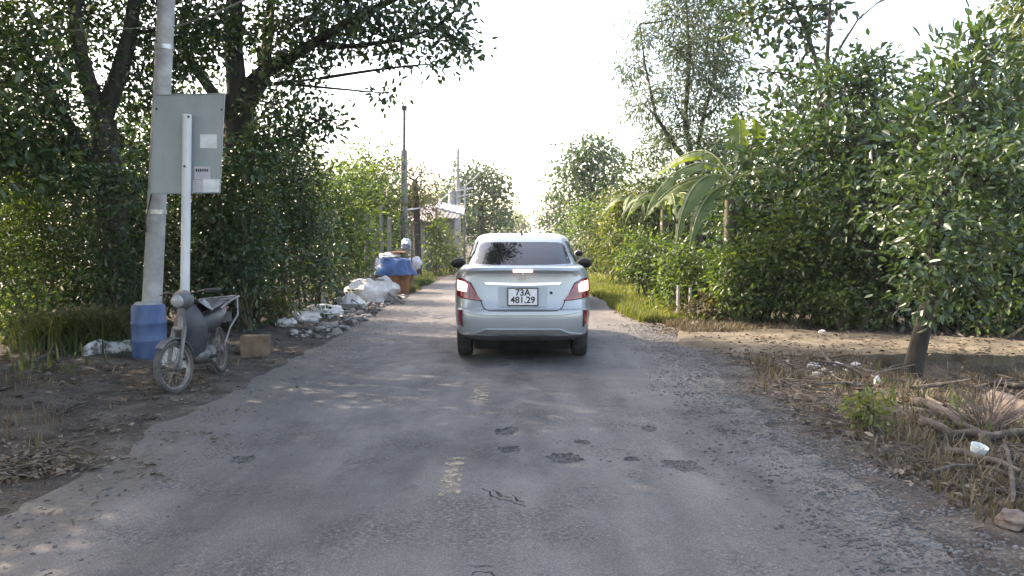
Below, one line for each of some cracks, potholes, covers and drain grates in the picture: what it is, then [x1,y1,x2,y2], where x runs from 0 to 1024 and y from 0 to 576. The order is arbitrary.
pothole [229,455,256,464]
pothole [545,453,585,464]
crack [482,488,526,507]
pothole [495,426,519,436]
pothole [660,460,706,473]
